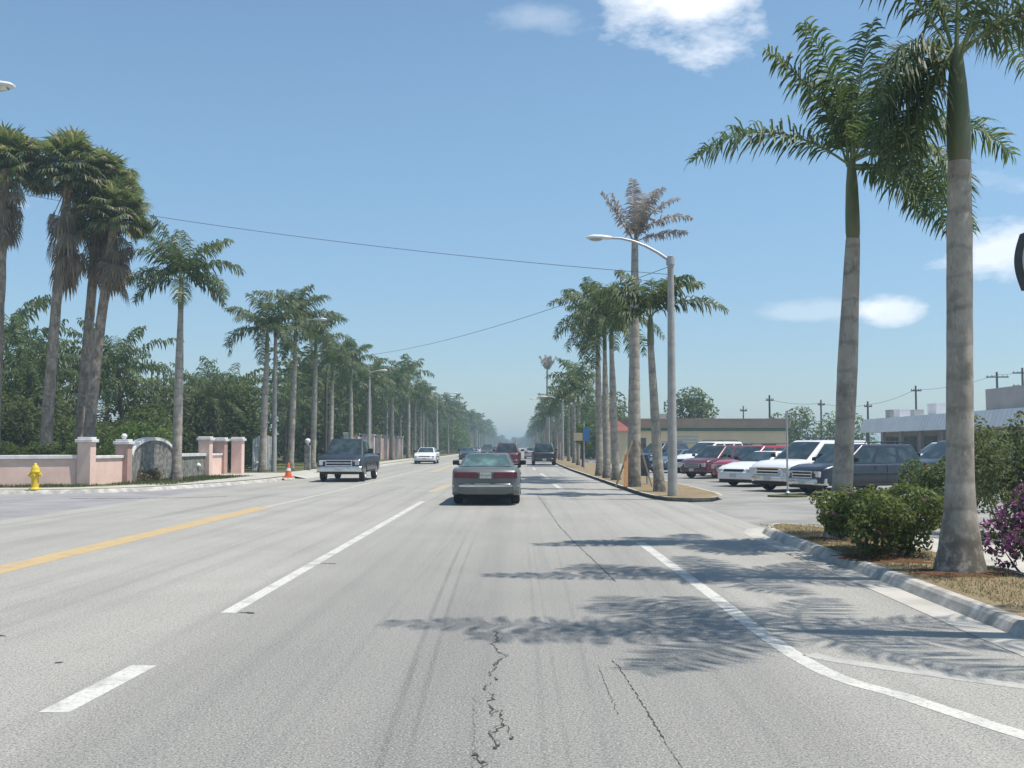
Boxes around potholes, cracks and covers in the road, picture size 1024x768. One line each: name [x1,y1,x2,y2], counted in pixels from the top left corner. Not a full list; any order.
crack [471,632,514,768]
crack [598,660,664,738]
